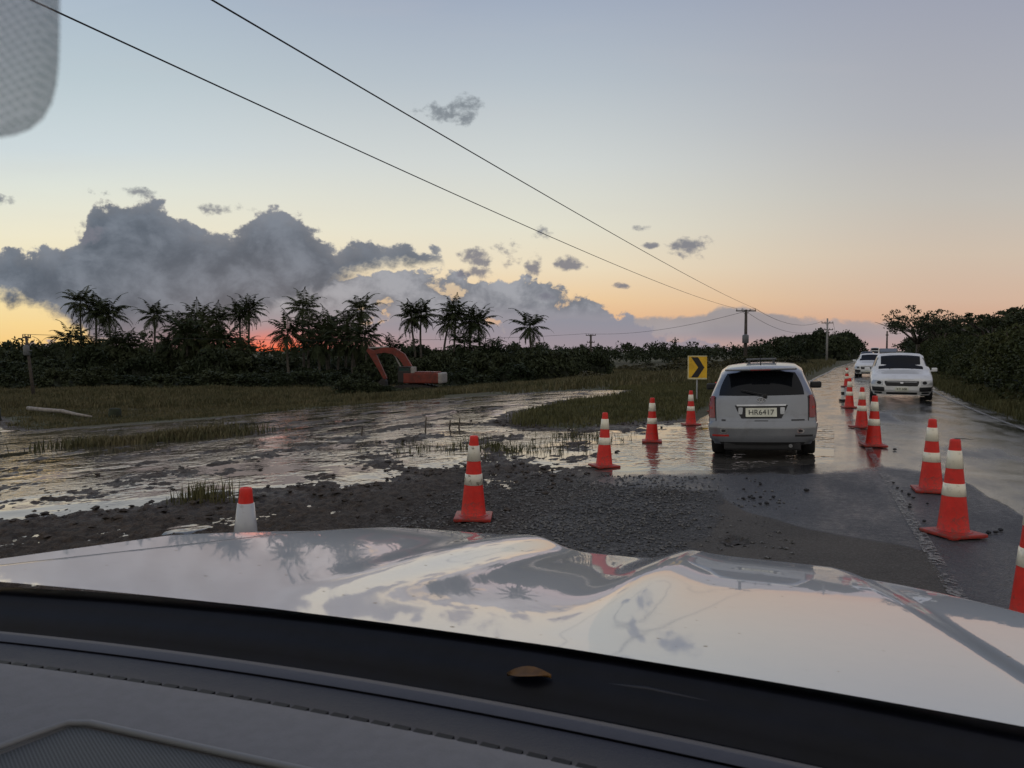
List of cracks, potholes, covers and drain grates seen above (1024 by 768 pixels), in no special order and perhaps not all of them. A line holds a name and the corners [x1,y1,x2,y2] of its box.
pothole [721,535,756,546]
